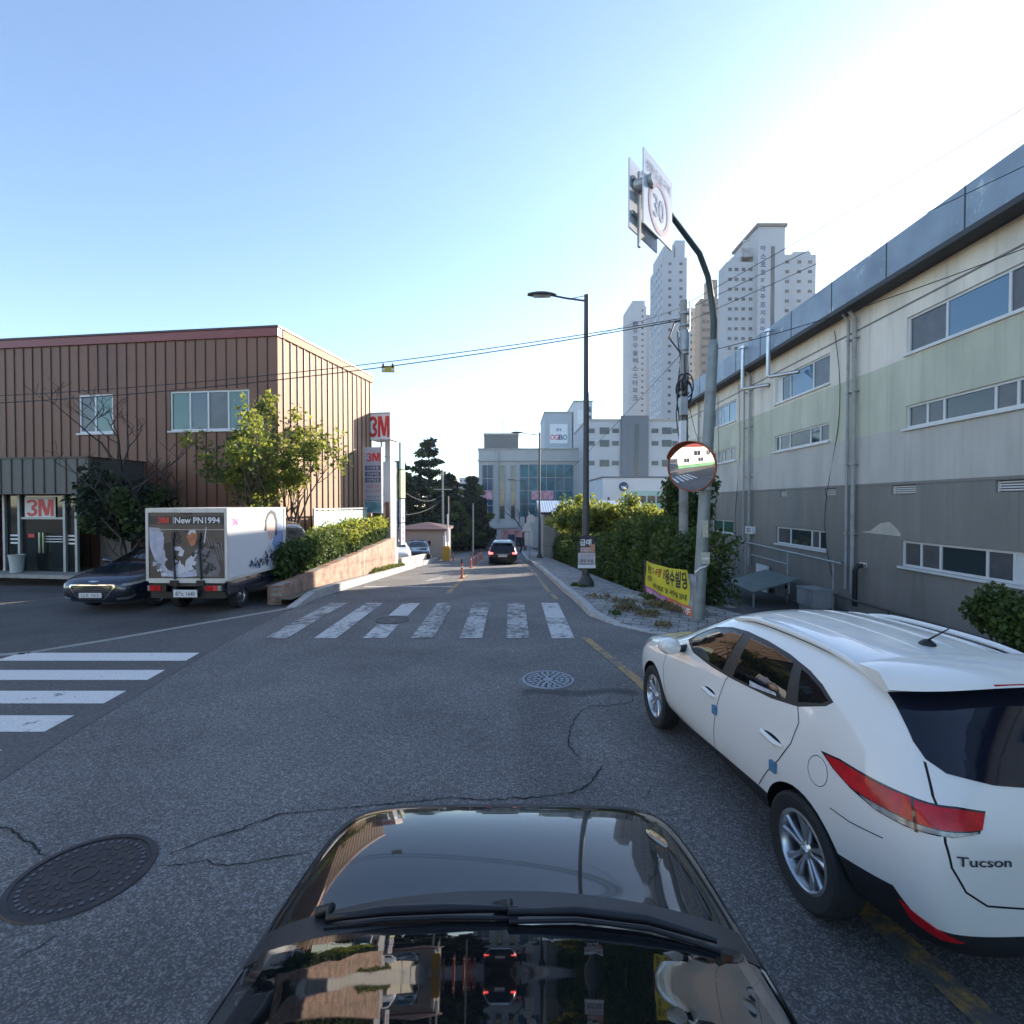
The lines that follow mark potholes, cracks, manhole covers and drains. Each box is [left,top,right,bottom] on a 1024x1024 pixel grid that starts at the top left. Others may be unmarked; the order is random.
manhole cover [522,671,574,689]
crack [0,827,47,856]
crack [158,696,633,867]
manhole cover [375,616,409,624]
manhole cover [0,834,159,925]
